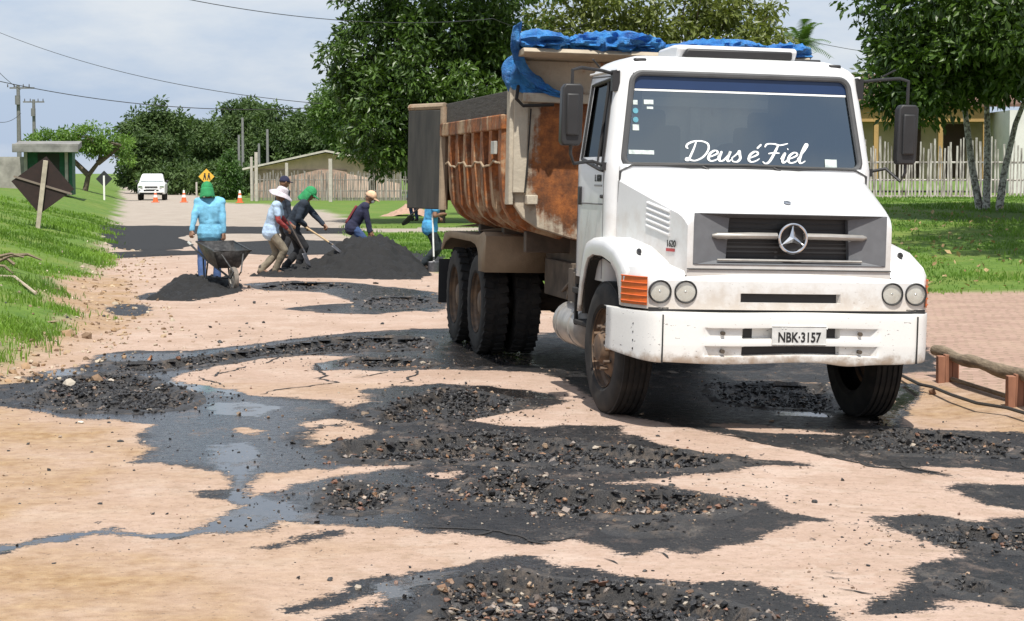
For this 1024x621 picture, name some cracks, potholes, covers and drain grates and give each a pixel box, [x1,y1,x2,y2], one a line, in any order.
pothole [296,553,906,621]
pothole [26,329,451,386]
pothole [232,420,814,490]
crack [264,363,338,394]
pothole [0,365,273,425]
pothole [654,372,947,427]
